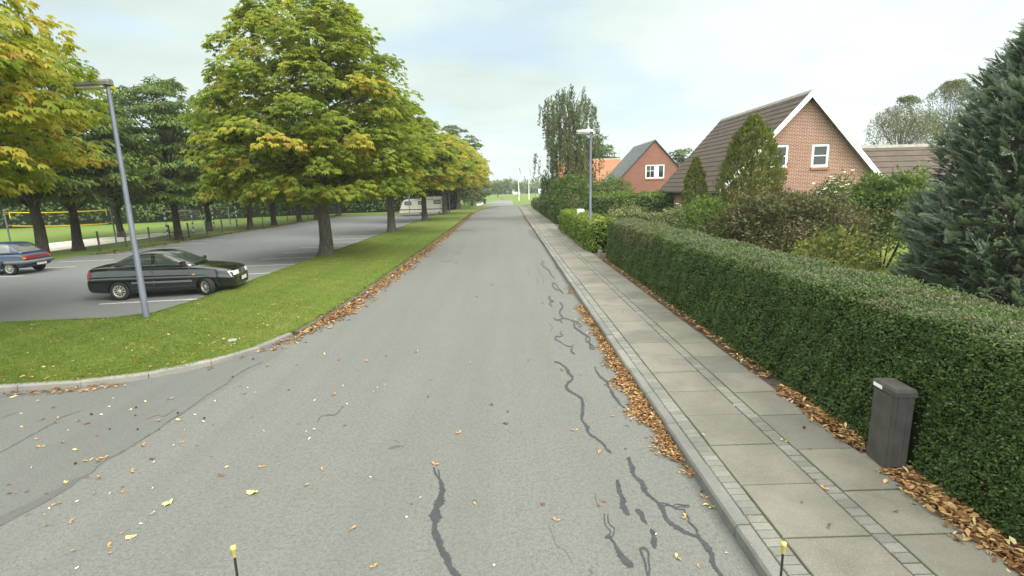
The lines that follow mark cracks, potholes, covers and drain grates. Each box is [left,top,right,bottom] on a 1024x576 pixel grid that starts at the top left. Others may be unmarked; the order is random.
crack [1,410,81,452]
crack [589,494,634,574]
